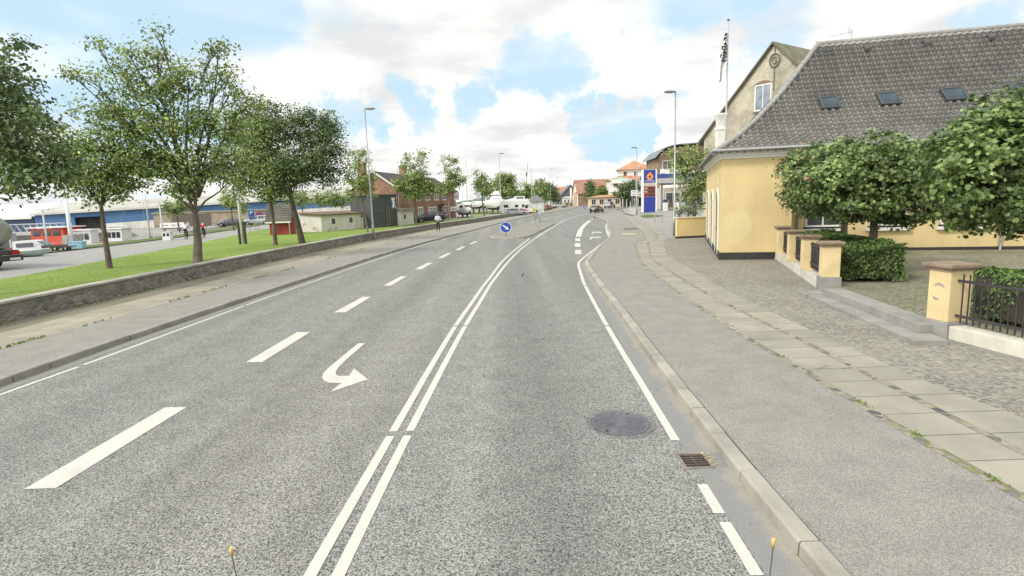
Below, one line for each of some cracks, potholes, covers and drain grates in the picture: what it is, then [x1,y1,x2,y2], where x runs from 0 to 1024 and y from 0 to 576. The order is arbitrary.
drain grate [675,452,719,469]
manhole cover [586,409,656,439]
